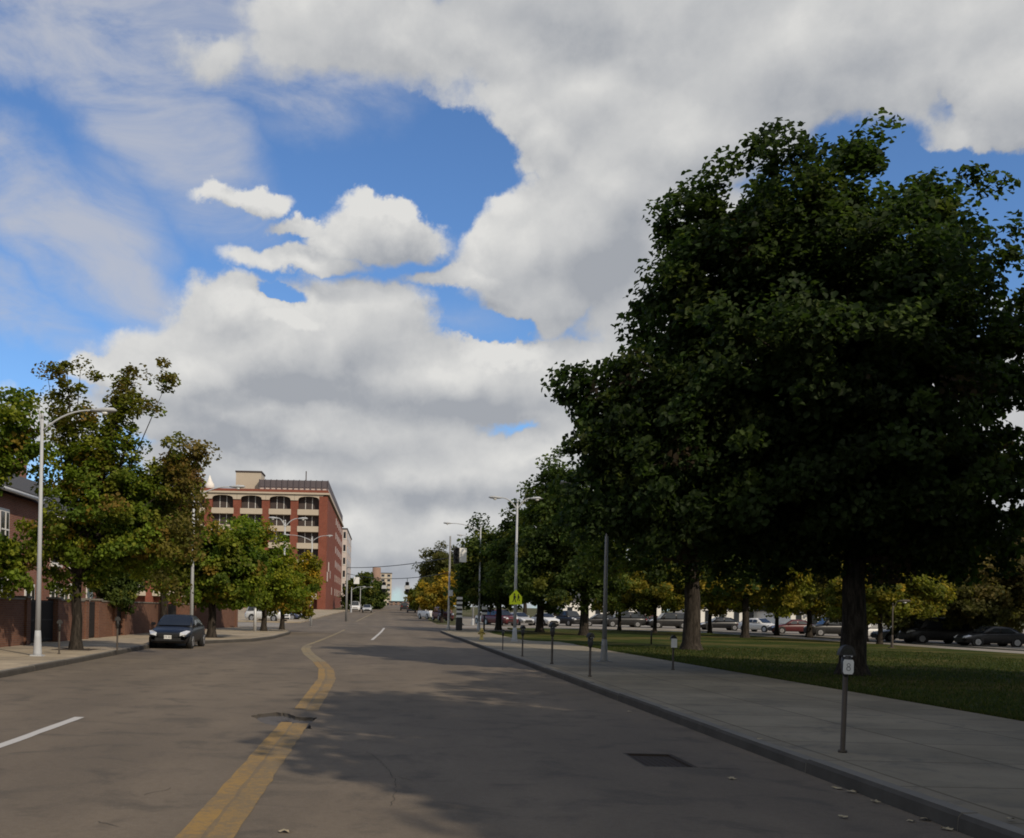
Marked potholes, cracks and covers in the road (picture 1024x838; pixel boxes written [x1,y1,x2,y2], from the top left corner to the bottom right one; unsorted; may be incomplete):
pothole [251,712,317,729]
